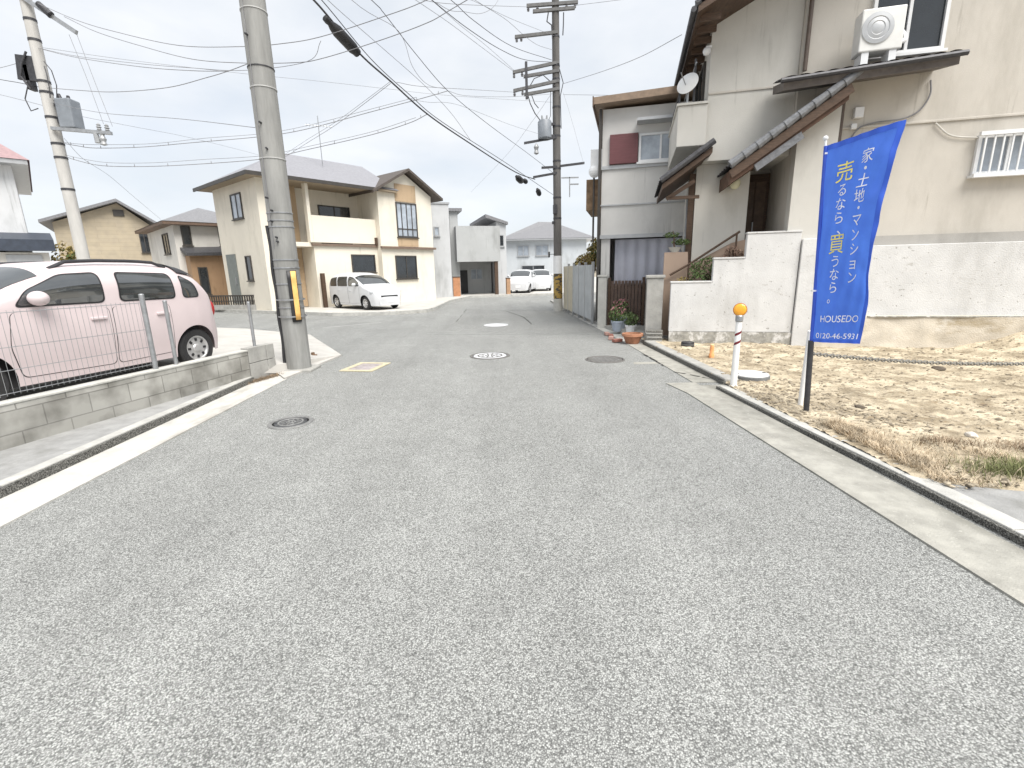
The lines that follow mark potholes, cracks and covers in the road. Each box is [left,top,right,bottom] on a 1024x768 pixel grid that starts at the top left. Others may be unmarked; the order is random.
manhole cover [267,415,314,429]
manhole cover [339,362,391,372]
manhole cover [738,370,770,381]
